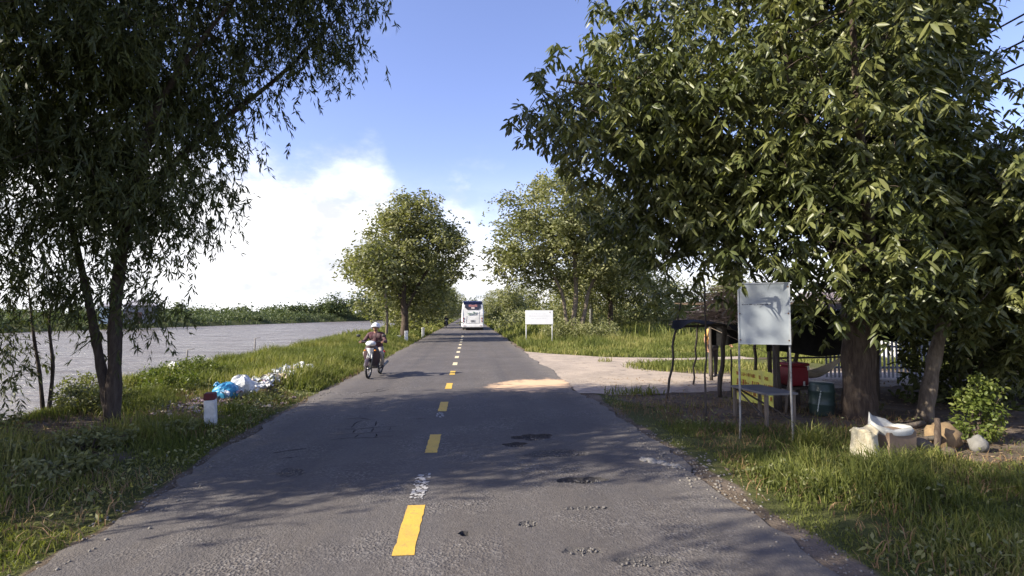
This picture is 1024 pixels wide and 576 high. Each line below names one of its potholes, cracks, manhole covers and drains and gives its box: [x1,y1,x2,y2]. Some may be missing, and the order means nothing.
pothole [611,555,682,568]
pothole [561,547,603,556]
crack [333,418,393,440]
